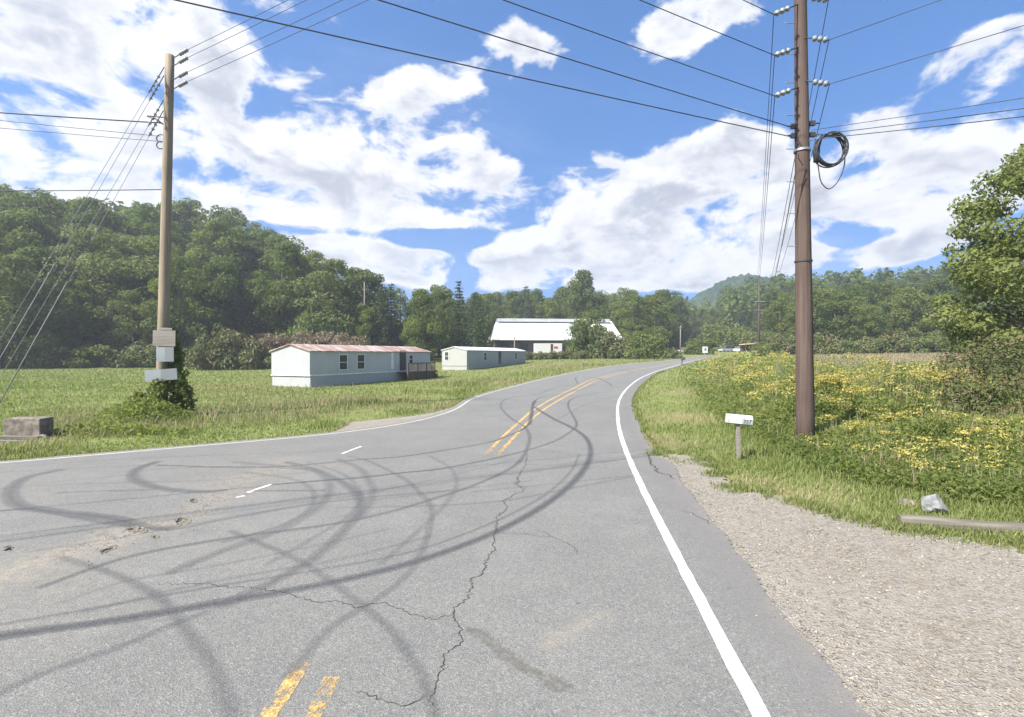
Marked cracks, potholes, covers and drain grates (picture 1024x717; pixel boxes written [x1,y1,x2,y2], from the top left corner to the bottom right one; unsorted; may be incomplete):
pothole [174,517,192,527]
pothole [124,526,152,534]
crack [156,451,577,713]
